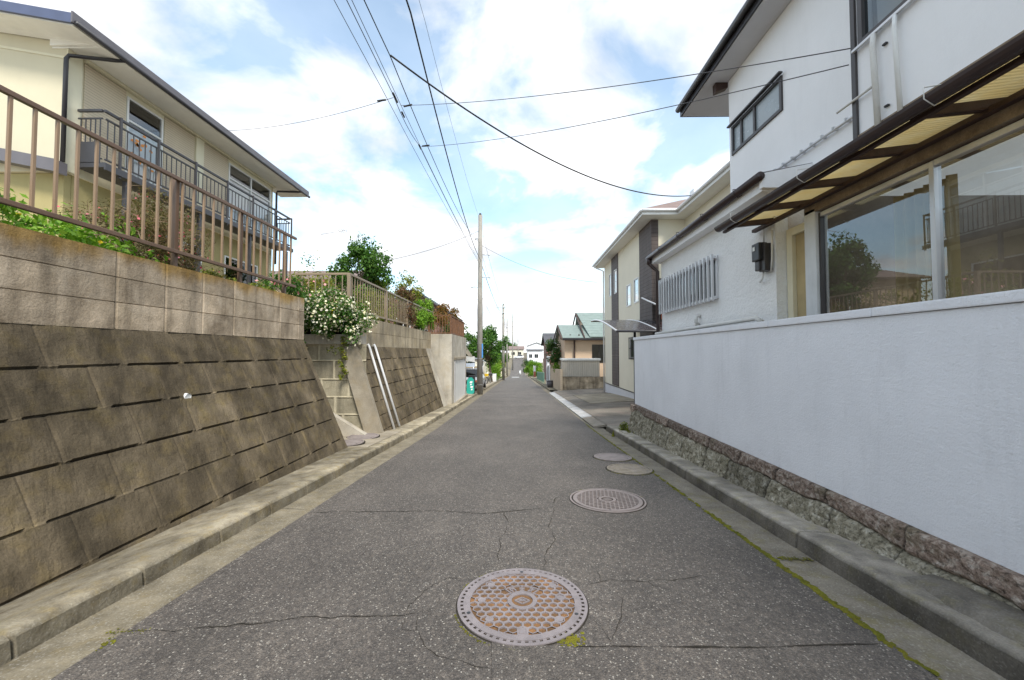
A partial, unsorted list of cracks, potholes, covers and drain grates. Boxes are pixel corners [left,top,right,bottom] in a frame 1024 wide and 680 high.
manhole cover [605,463,654,475]
crack [315,497,563,565]
manhole cover [592,453,632,462]
manhole cover [569,488,647,513]
manhole cover [456,568,589,646]
